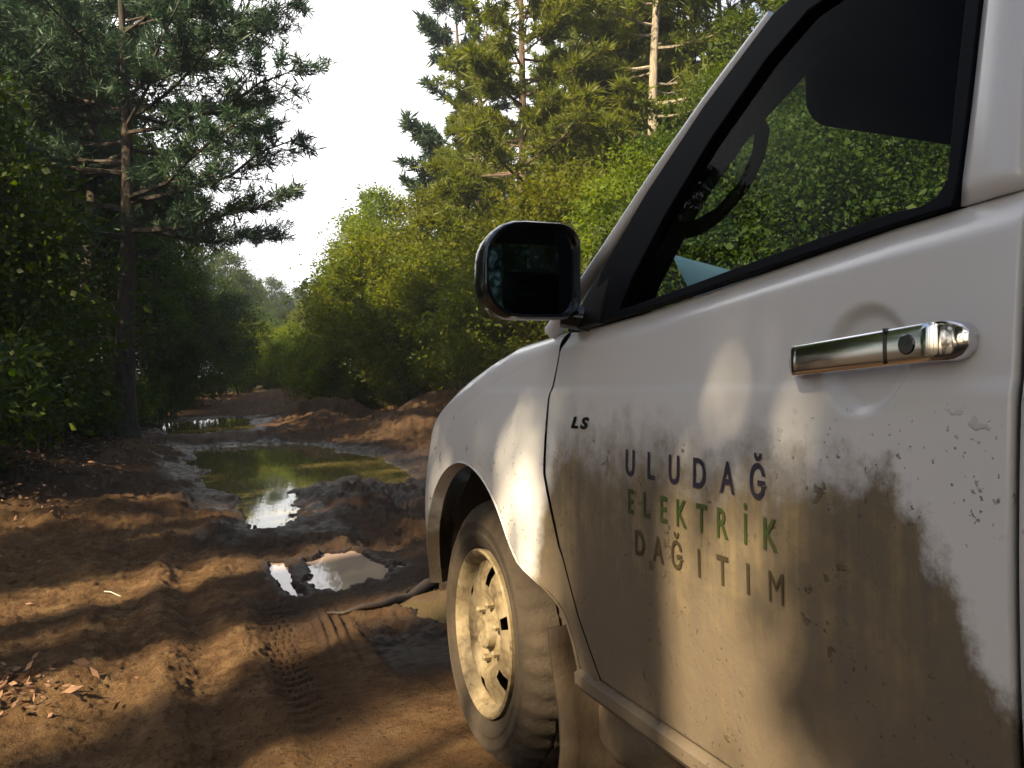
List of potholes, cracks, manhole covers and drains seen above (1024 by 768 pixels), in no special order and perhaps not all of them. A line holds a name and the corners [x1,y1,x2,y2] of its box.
pothole [164,437,428,533]
pothole [284,545,423,598]
pothole [260,558,315,600]
pothole [140,414,271,437]
